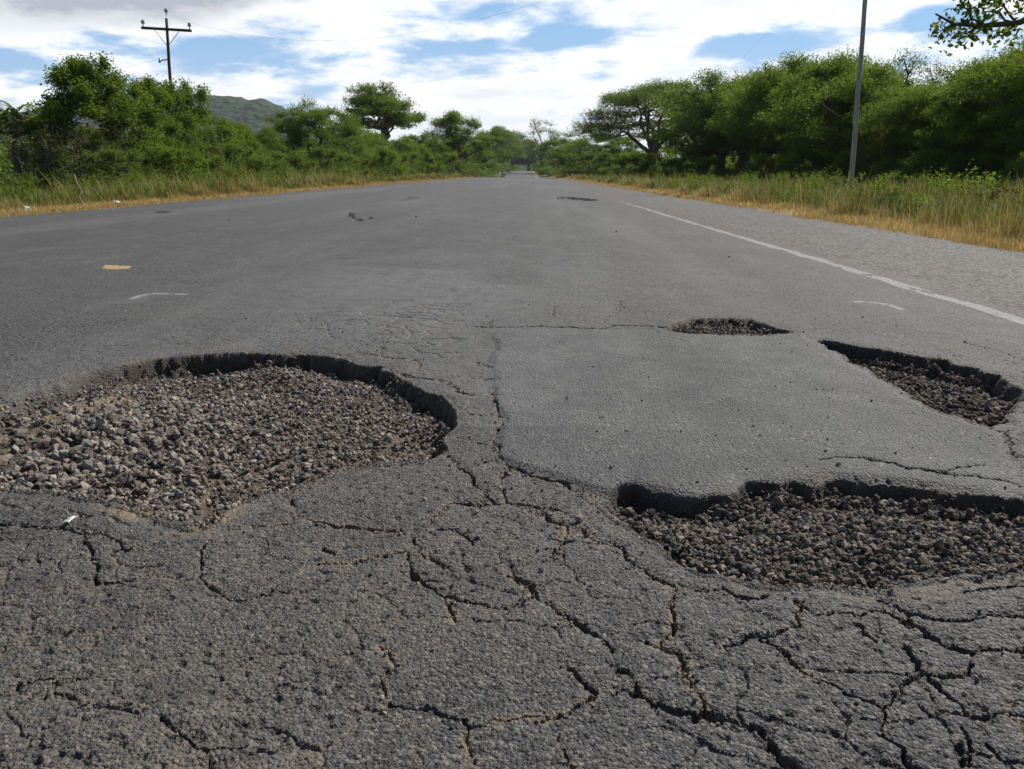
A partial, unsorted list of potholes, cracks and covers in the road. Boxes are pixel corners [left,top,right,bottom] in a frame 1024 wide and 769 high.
pothole [593,476,1024,599]
pothole [0,352,462,534]
pothole [662,317,796,336]
crack [0,300,1024,769]
pothole [813,339,1024,430]
